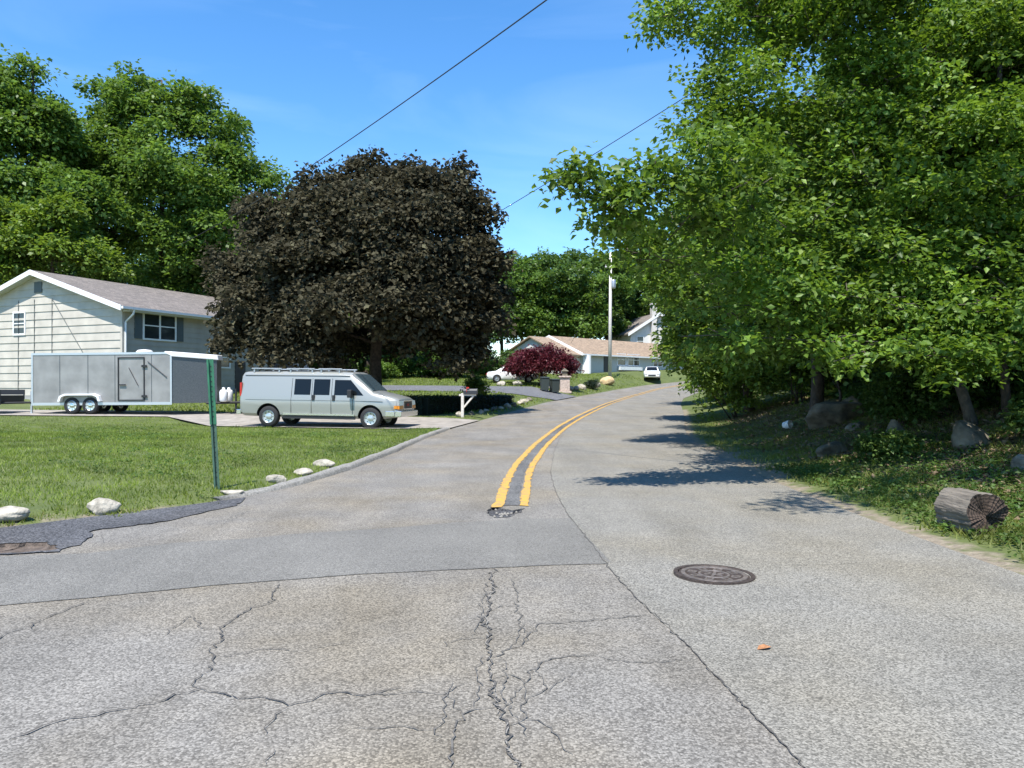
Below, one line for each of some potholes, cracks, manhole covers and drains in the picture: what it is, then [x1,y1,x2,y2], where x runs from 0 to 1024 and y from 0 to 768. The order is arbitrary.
pothole [487,507,525,518]
crack [0,427,806,768]
manhole cover [673,564,756,585]
